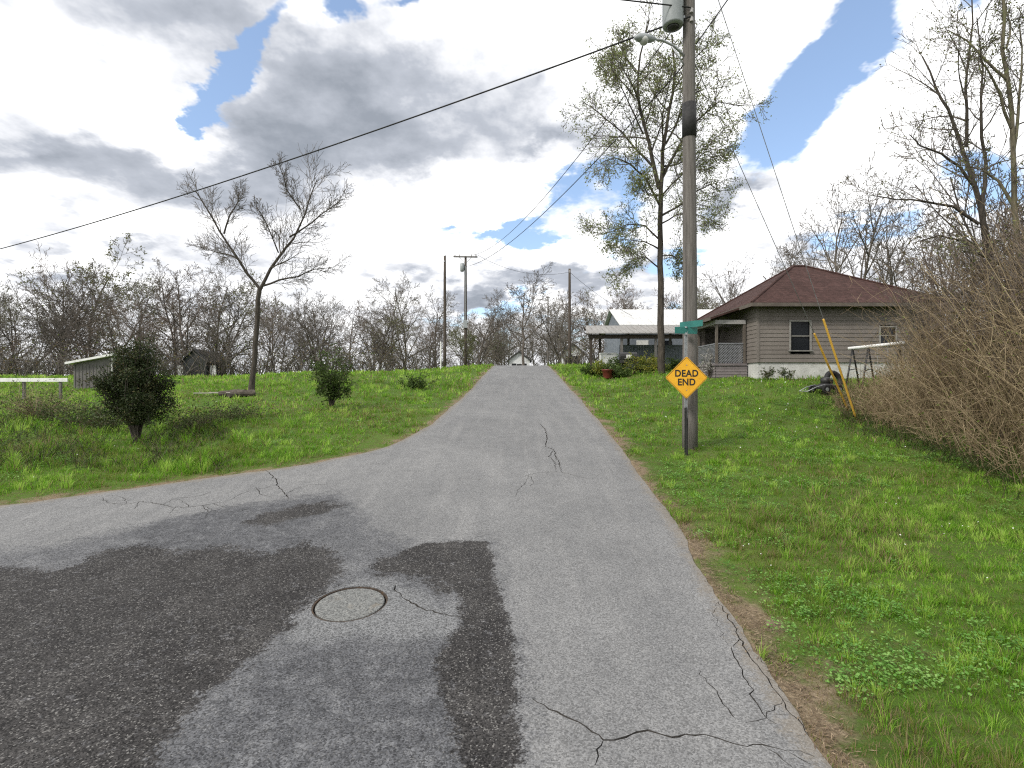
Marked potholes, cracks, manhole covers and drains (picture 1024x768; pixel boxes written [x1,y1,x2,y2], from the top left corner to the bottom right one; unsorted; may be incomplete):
crack [533,602,818,767]
manhole cover [311,587,388,622]
crack [103,491,248,518]
crack [394,585,472,621]
crack [516,424,583,494]
